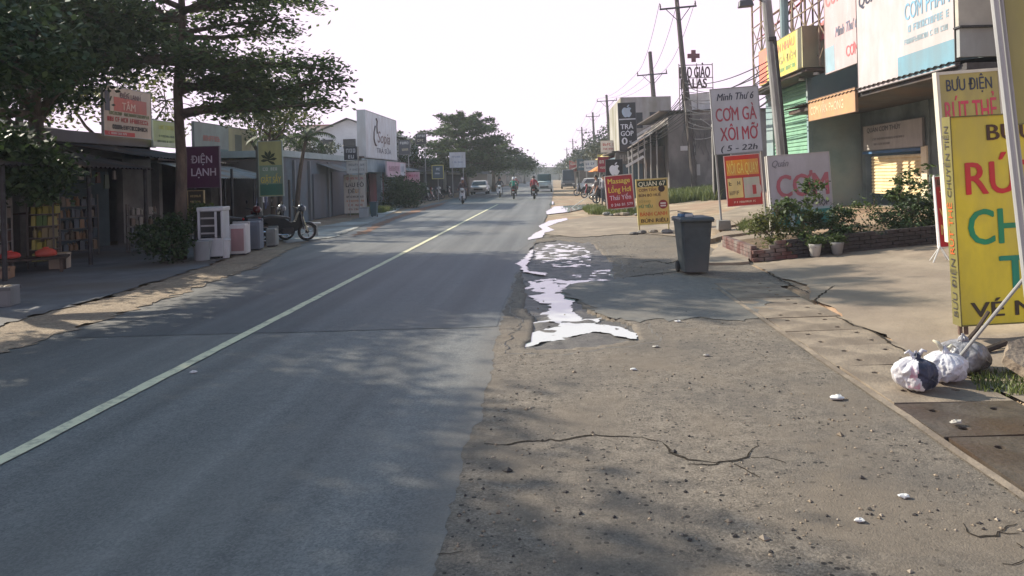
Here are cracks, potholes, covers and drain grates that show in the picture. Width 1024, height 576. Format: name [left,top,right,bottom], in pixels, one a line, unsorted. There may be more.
crack [963,523,1023,565]
crack [768,272,835,305]
pothole [504,239,662,355]
crack [484,434,786,477]
crack [837,317,905,351]
